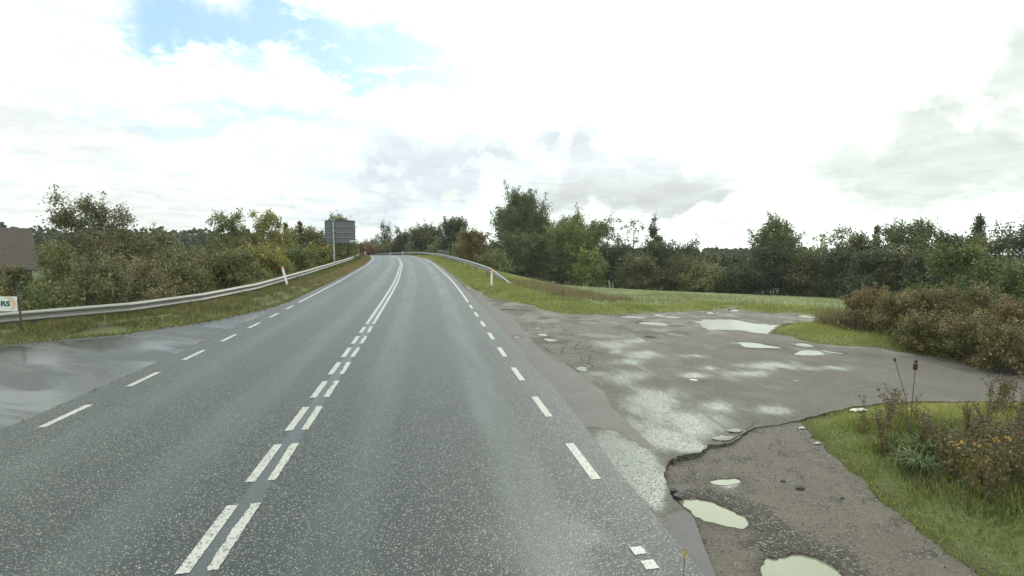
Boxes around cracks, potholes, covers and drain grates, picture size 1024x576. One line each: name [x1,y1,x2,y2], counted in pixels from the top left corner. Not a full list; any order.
crack [546,341,601,371]
pothole [695,319,779,334]
pothole [677,498,749,529]
pothole [709,477,741,486]
pothole [760,552,845,576]
